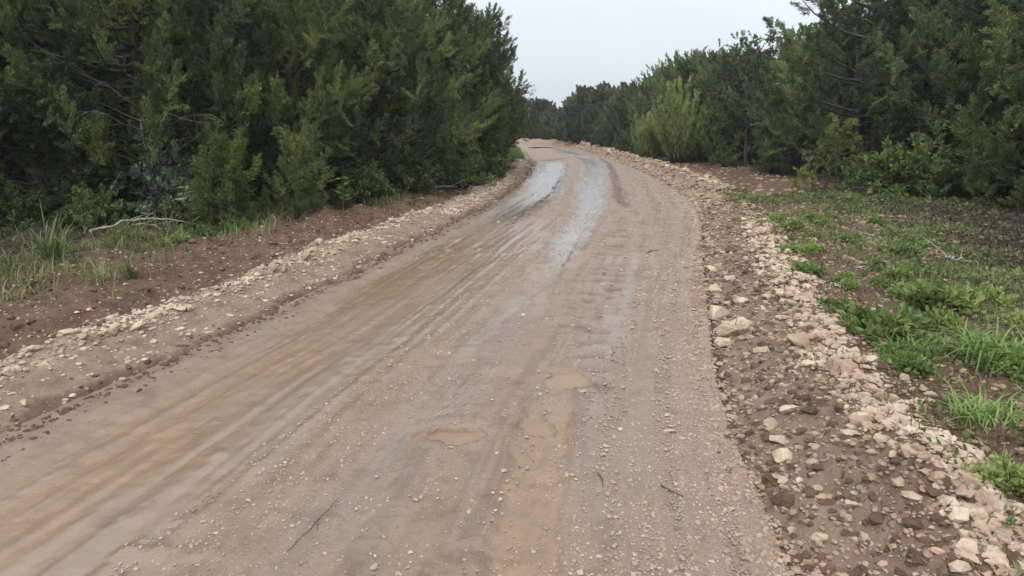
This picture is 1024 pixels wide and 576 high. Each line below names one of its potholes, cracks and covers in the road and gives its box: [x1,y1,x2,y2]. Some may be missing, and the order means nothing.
pothole [541,371,593,390]
pothole [518,413,558,439]
pothole [425,427,488,445]
